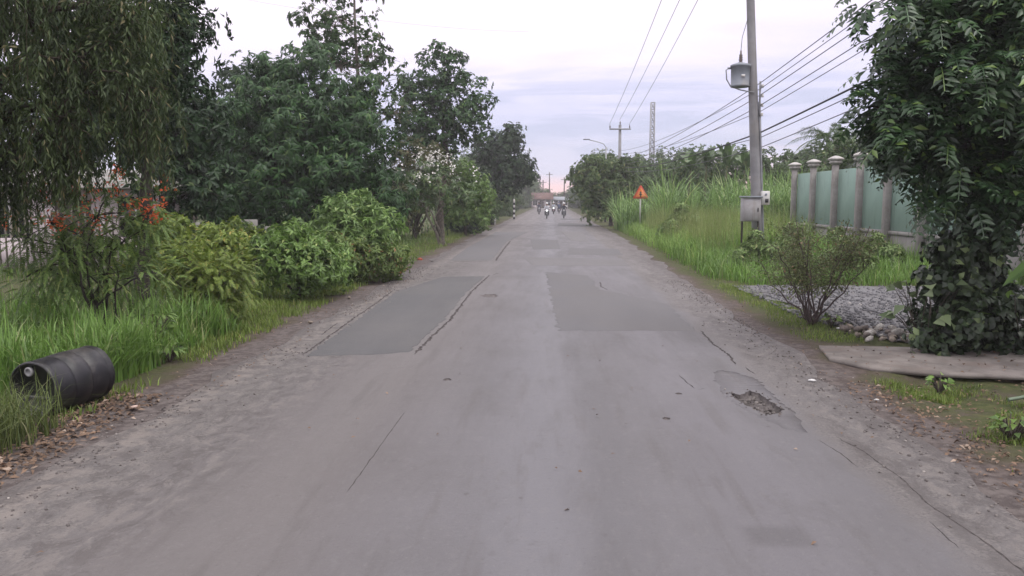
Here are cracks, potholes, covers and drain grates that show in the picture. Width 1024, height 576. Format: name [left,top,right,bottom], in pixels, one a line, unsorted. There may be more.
crack [822,440,1024,573]
pothole [714,370,808,433]
crack [348,412,405,490]
crack [701,331,755,374]
